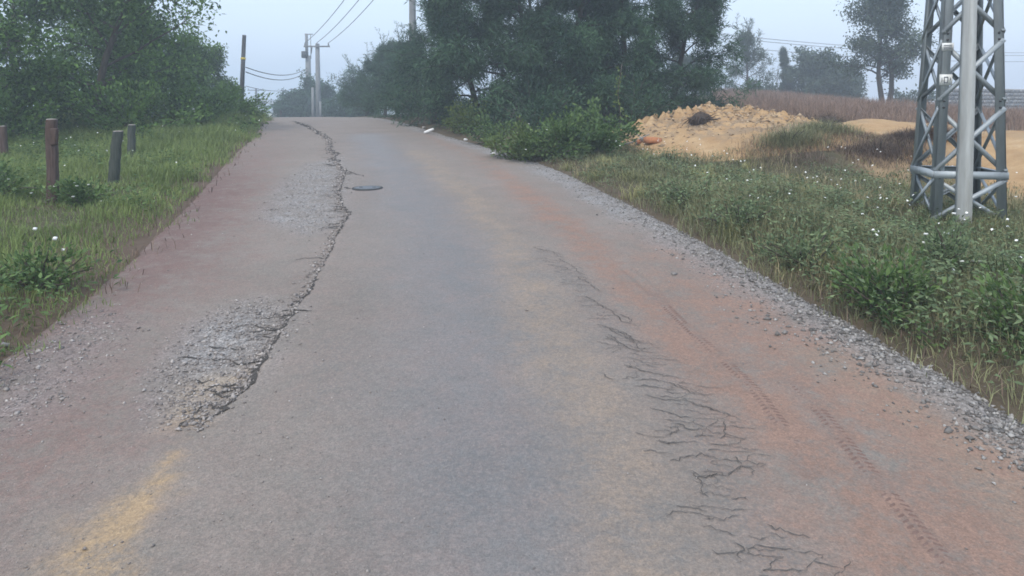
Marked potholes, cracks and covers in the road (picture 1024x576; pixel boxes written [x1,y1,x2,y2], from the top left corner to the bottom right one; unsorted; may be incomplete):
crack [177,121,364,427]
crack [534,246,851,576]
